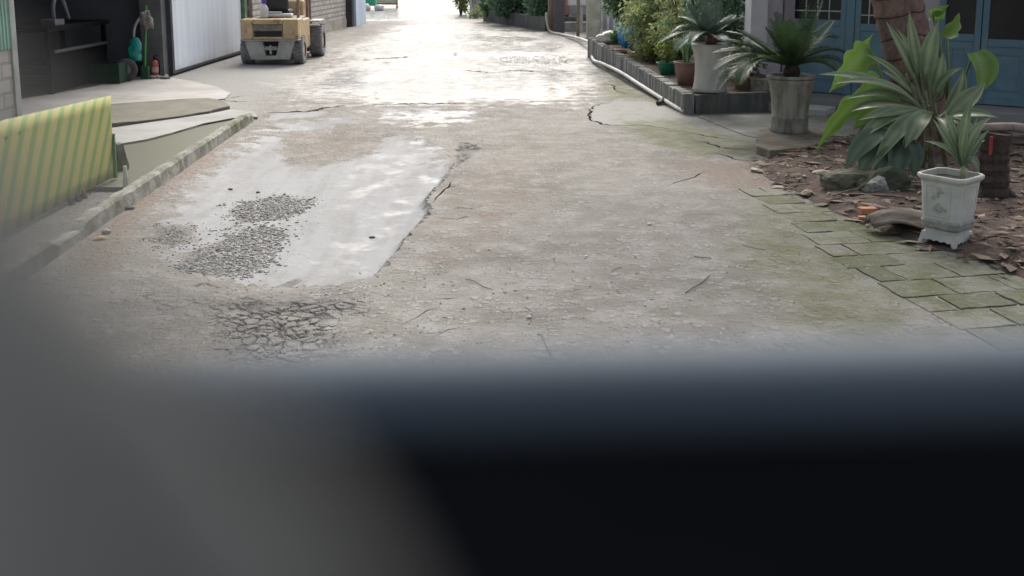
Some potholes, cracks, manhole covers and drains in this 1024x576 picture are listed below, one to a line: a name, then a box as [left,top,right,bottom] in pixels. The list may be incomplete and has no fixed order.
crack [587,83,763,161]
crack [161,285,461,354]
crack [433,180,474,219]
